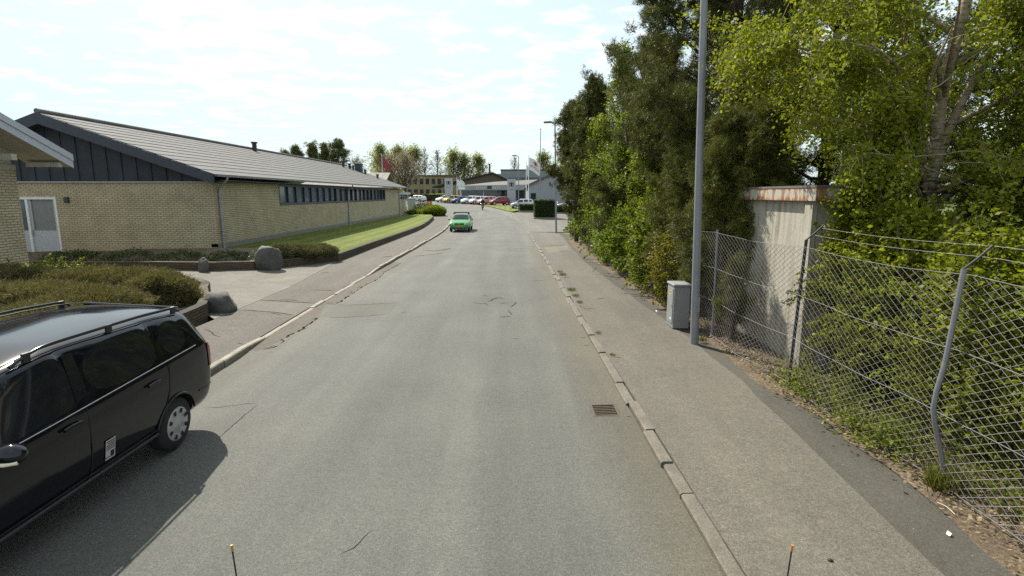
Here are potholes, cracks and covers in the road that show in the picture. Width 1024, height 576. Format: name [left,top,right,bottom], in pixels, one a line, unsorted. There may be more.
crack [328,256,397,303]
drain grate [589,404,621,417]
